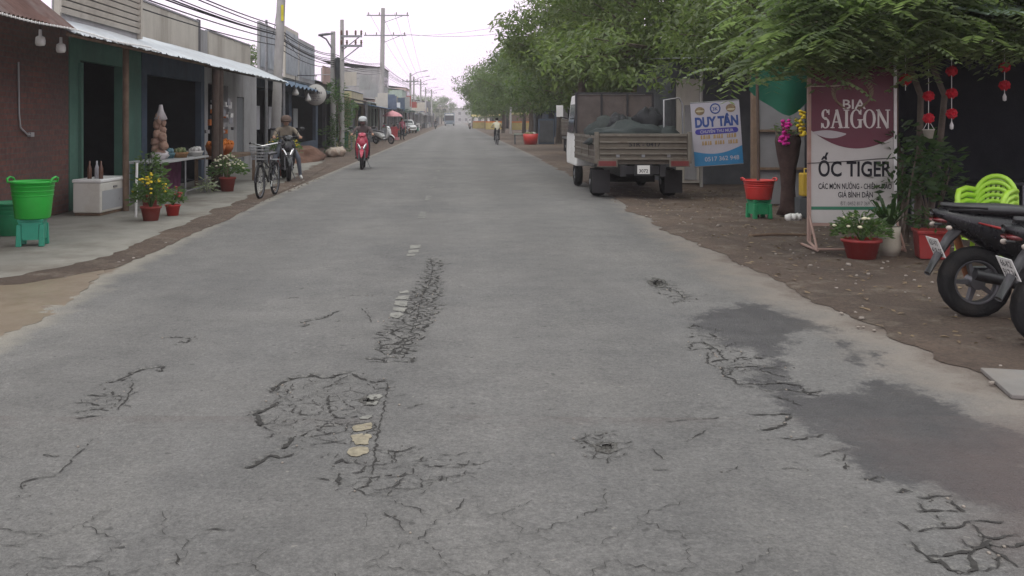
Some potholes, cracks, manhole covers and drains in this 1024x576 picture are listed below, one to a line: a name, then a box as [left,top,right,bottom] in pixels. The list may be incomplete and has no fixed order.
crack [18,440,92,497]
crack [77,366,165,419]
pothole [590,441,618,454]
crack [896,488,1024,574]
pothole [647,277,669,288]
crack [244,258,770,576]
